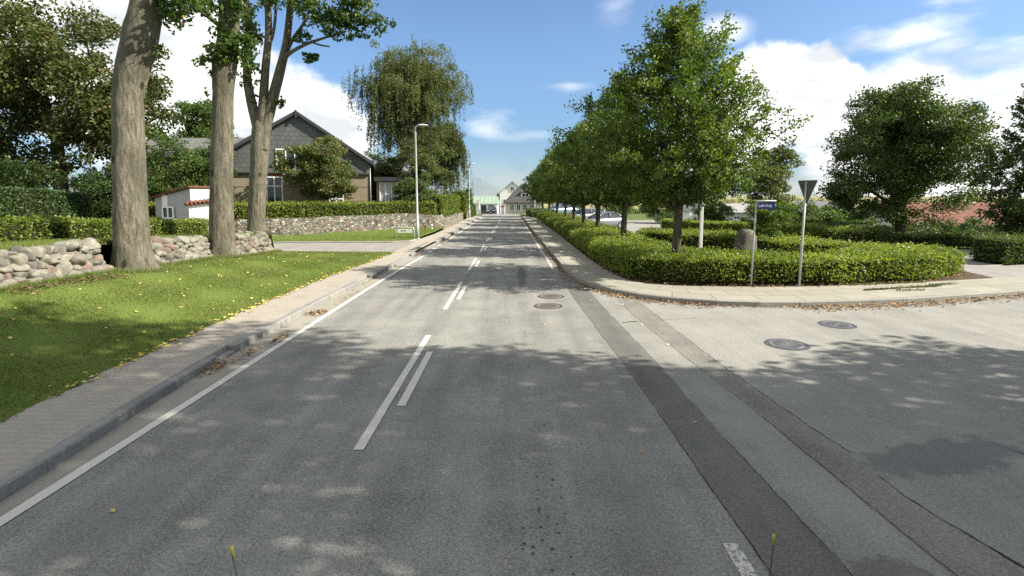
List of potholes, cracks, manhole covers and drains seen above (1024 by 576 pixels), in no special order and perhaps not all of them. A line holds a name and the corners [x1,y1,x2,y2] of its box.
manhole cover [764,339,811,351]
manhole cover [818,321,857,329]
